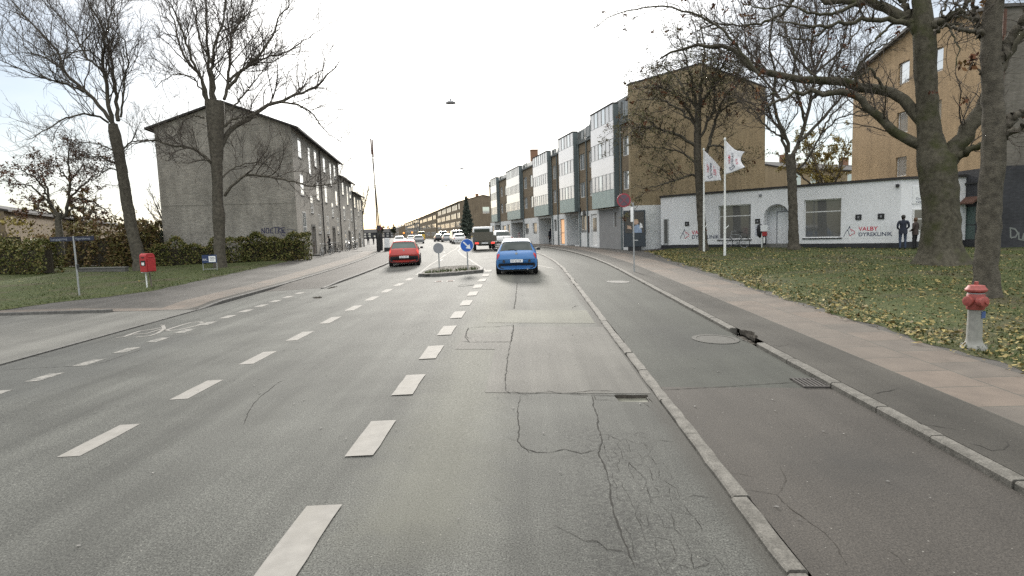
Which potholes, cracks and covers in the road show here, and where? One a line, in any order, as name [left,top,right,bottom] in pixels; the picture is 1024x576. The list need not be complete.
manhole cover [692,334,740,344]
crack [731,471,903,563]
drain grate [789,378,831,388]
crack [507,390,725,570]
